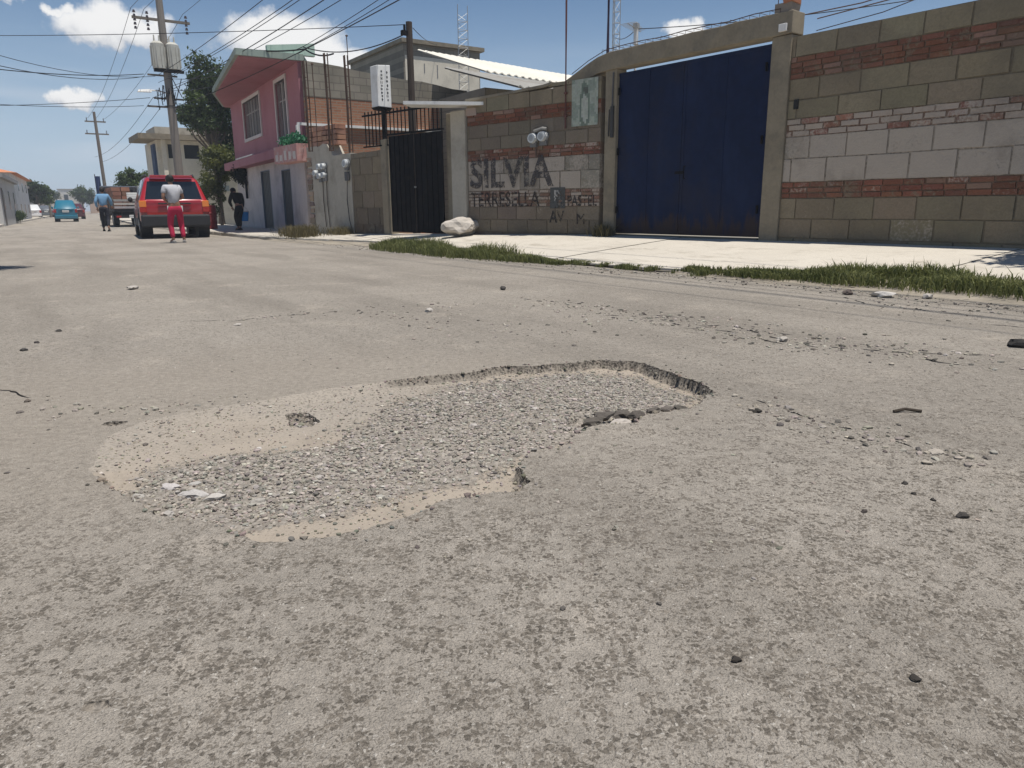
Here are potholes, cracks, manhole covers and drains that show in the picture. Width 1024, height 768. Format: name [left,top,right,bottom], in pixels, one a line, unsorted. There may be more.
pothole [88,359,716,548]
